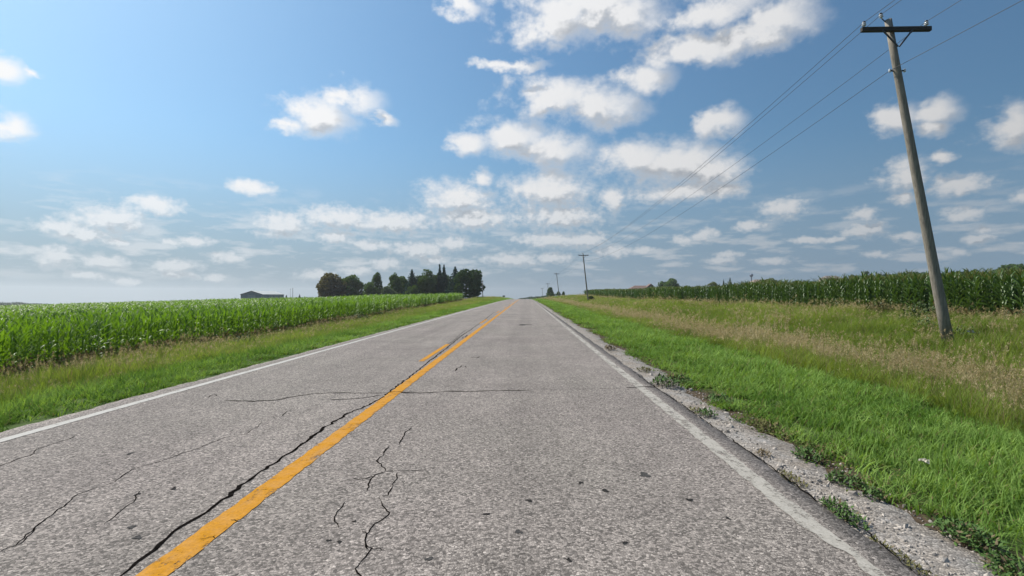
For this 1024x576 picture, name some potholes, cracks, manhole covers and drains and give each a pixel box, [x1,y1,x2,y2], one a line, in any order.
crack [209,392,378,416]
crack [1,423,261,551]
crack [354,428,417,576]
